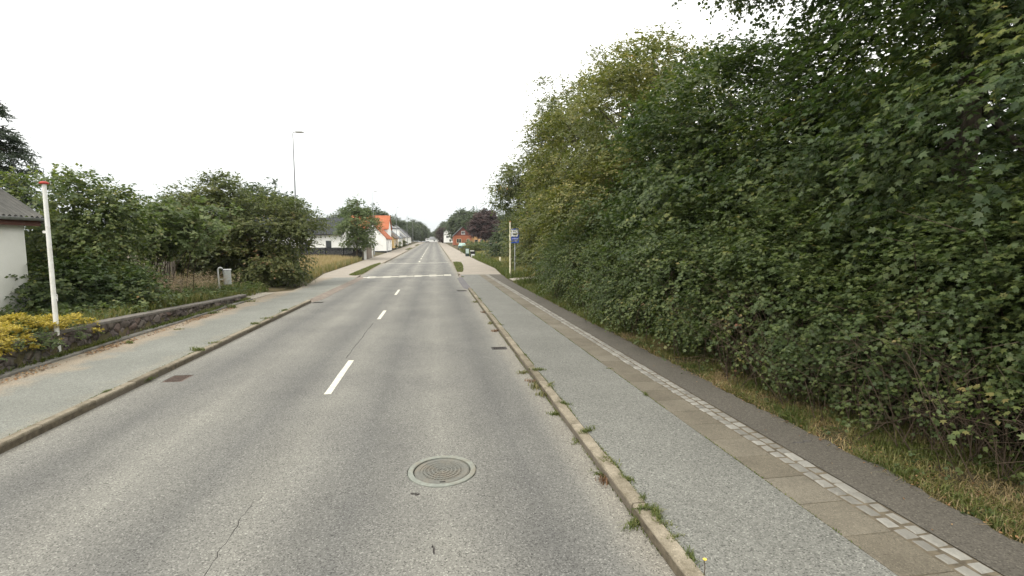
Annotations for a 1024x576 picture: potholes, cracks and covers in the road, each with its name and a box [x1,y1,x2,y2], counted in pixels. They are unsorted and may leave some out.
manhole cover [407,455,476,488]
